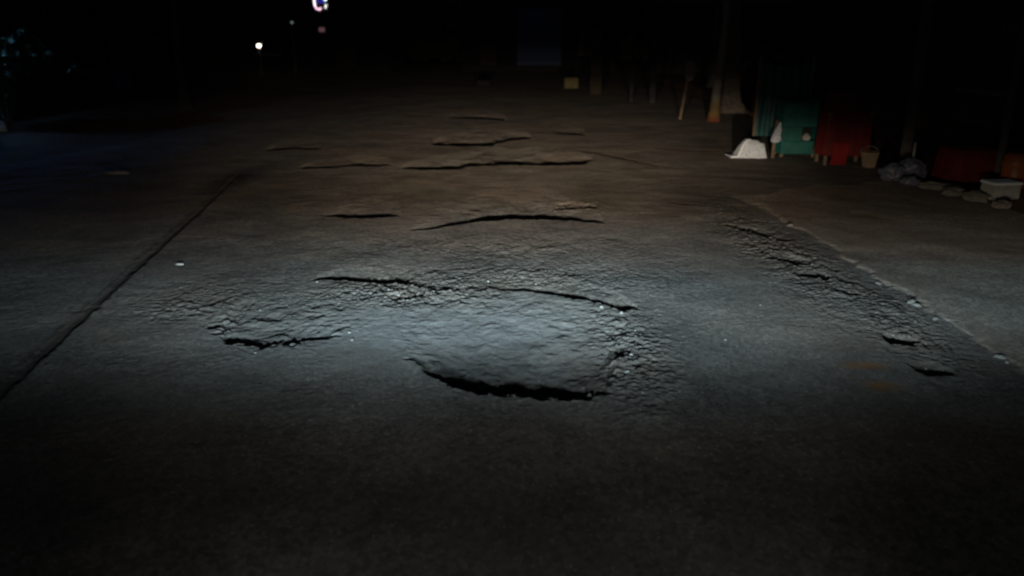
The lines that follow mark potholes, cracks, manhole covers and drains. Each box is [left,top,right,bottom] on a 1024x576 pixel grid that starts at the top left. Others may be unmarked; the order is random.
pothole [398,290,634,403]
pothole [385,289,427,303]
pothole [878,330,922,347]
pothole [907,360,963,377]
